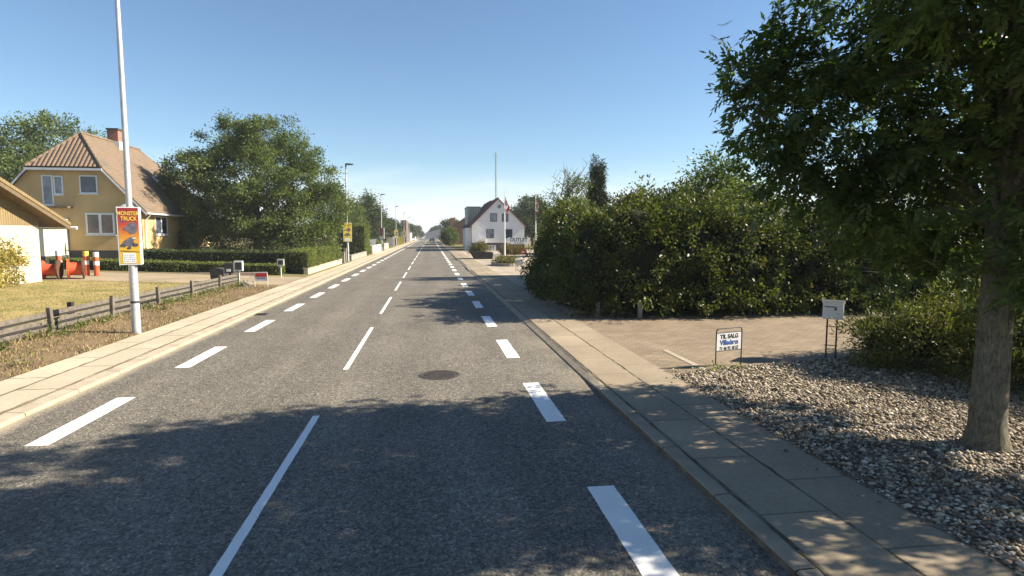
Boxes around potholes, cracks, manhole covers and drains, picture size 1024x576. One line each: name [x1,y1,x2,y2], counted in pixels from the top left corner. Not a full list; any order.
manhole cover [419,370,460,380]
